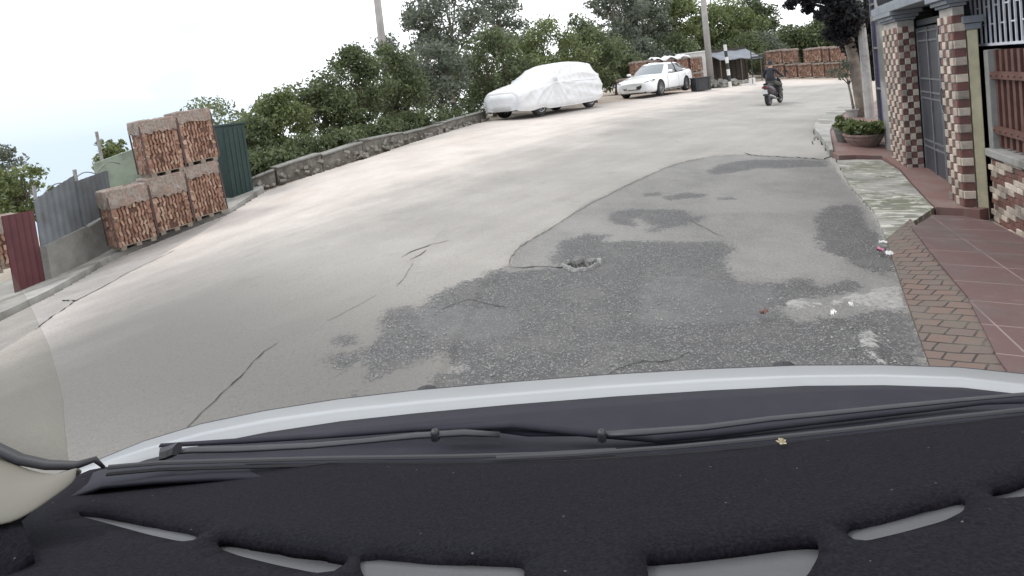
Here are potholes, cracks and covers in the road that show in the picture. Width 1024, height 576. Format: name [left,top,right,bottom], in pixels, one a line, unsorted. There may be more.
crack [189,343,277,425]
crack [38,251,172,327]
pothole [560,258,603,272]
